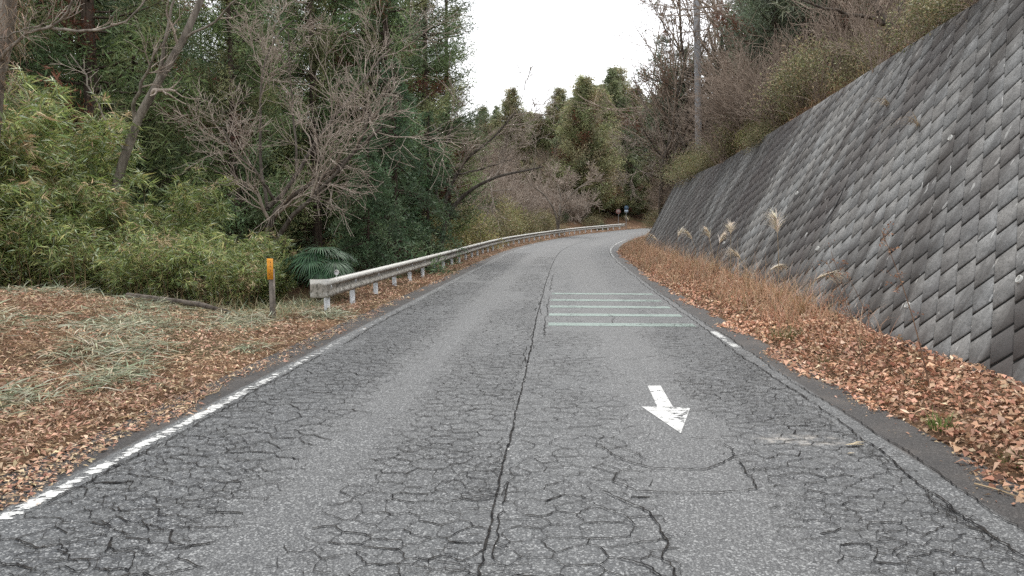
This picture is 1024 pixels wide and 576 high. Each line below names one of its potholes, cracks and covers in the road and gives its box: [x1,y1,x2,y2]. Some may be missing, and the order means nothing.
crack [470,274,766,576]
crack [607,252,1024,576]
crack [0,254,526,576]
